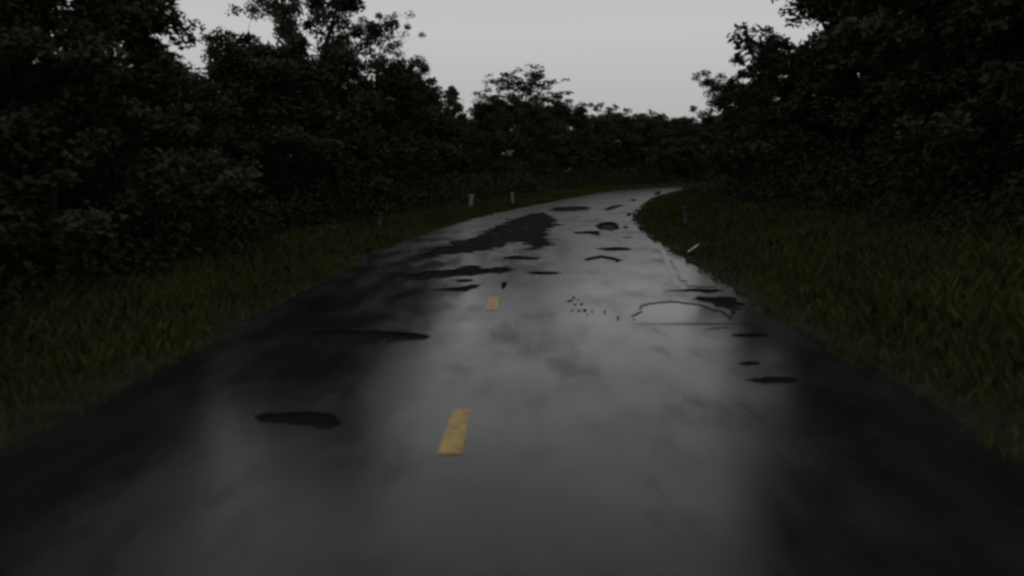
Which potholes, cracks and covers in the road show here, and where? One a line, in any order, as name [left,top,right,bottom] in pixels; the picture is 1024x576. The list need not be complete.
pothole [745,376,799,384]
pothole [693,296,745,310]
pothole [594,221,619,231]
pothole [417,213,563,259]
pothole [313,330,433,346]
pothole [584,255,622,263]
pothole [254,411,341,429]
